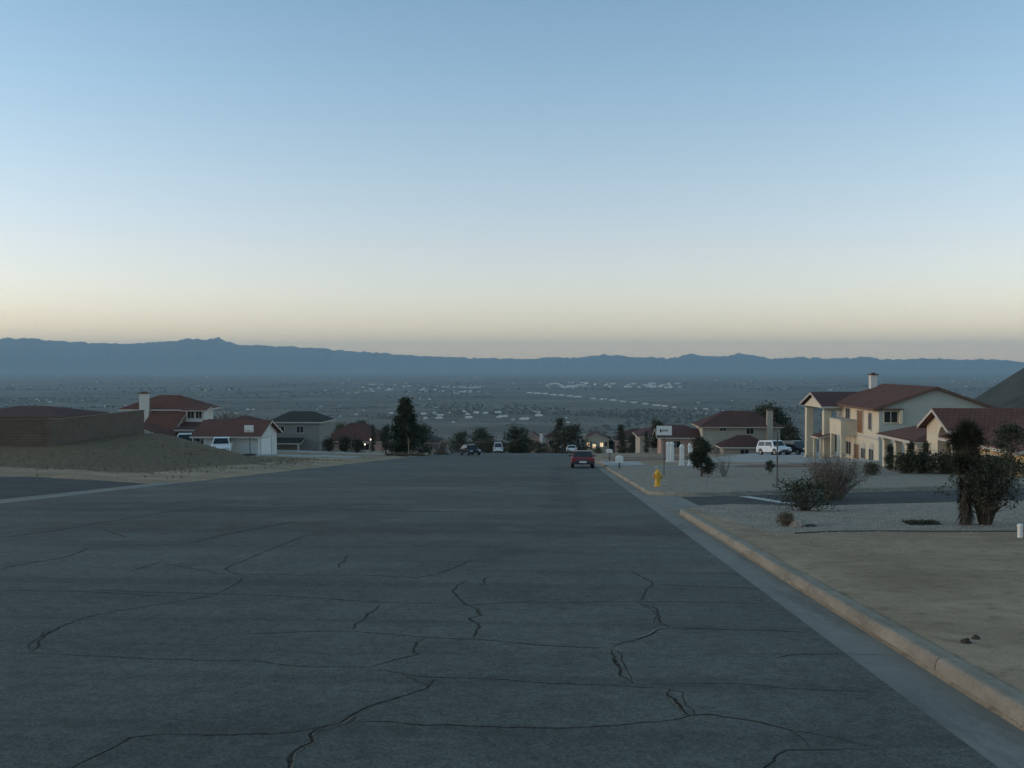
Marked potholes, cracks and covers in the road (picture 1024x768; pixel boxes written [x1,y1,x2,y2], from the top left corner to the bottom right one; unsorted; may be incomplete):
crack [1,506,882,768]
